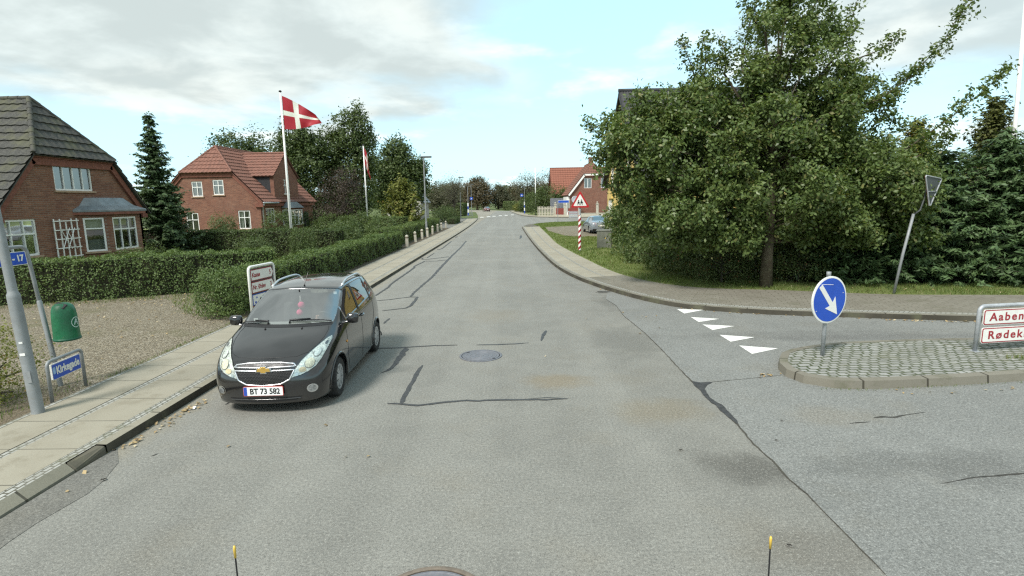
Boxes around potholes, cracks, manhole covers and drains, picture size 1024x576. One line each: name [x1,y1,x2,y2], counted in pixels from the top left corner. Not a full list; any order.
manhole cover [459,350,502,362]
crack [940,473,1024,484]
manhole cover [398,566,475,576]
